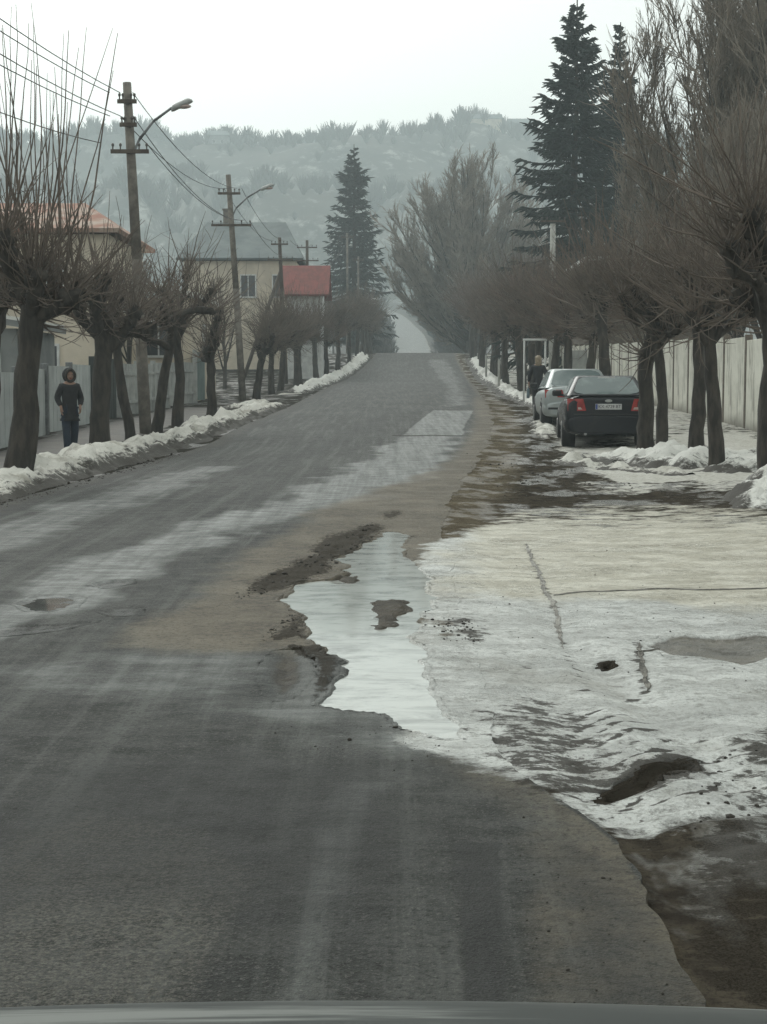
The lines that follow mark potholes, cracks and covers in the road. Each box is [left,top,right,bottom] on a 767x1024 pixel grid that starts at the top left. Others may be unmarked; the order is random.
crack [636,642,660,691]
pothole [595,660,618,672]
pothole [274,530,469,741]
crack [526,543,767,649]
pothole [590,757,714,805]
pothole [10,594,88,613]
